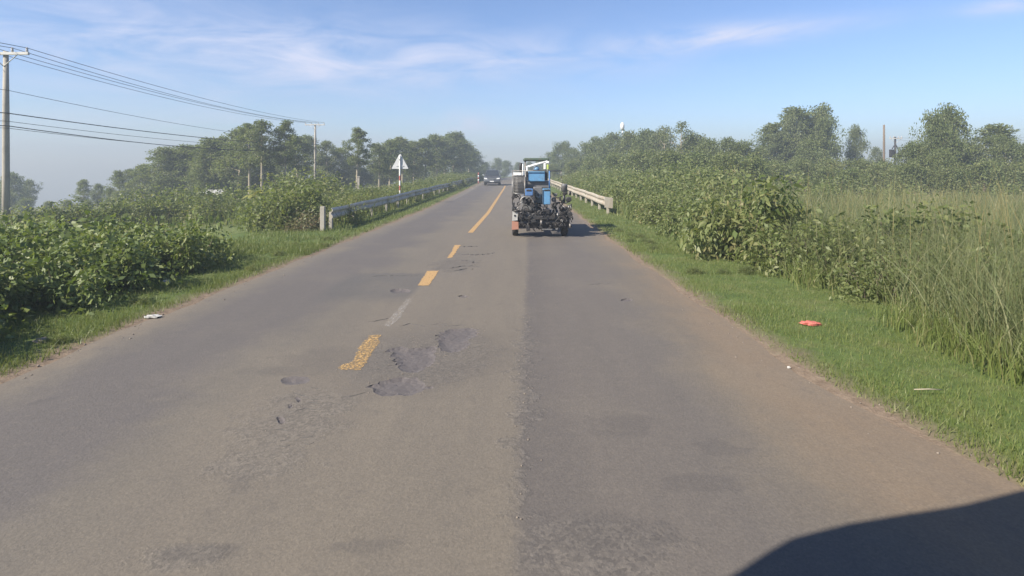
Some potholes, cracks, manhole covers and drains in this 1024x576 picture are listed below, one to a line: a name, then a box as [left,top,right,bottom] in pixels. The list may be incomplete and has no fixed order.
pothole [435,328,480,353]
pothole [281,376,310,385]
pothole [366,377,433,396]
pothole [385,346,438,373]
